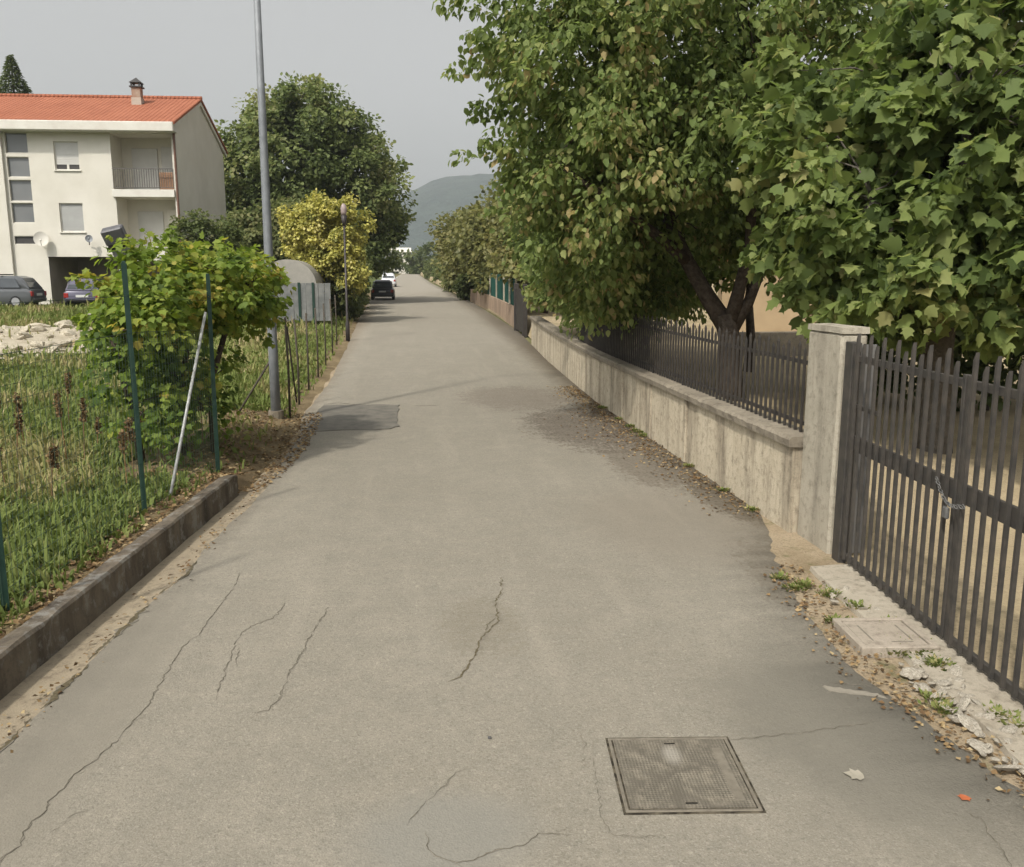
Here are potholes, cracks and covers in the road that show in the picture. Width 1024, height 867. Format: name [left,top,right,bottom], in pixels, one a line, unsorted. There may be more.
utility cover [832,617,941,658]
crack [732,720,876,740]
crack [968,812,1012,867]
crack [406,768,575,866]
manhole cover [605,736,766,815]
crack [448,578,503,682]
crack [0,561,239,862]
crack [216,602,328,713]
crack [580,733,652,838]
